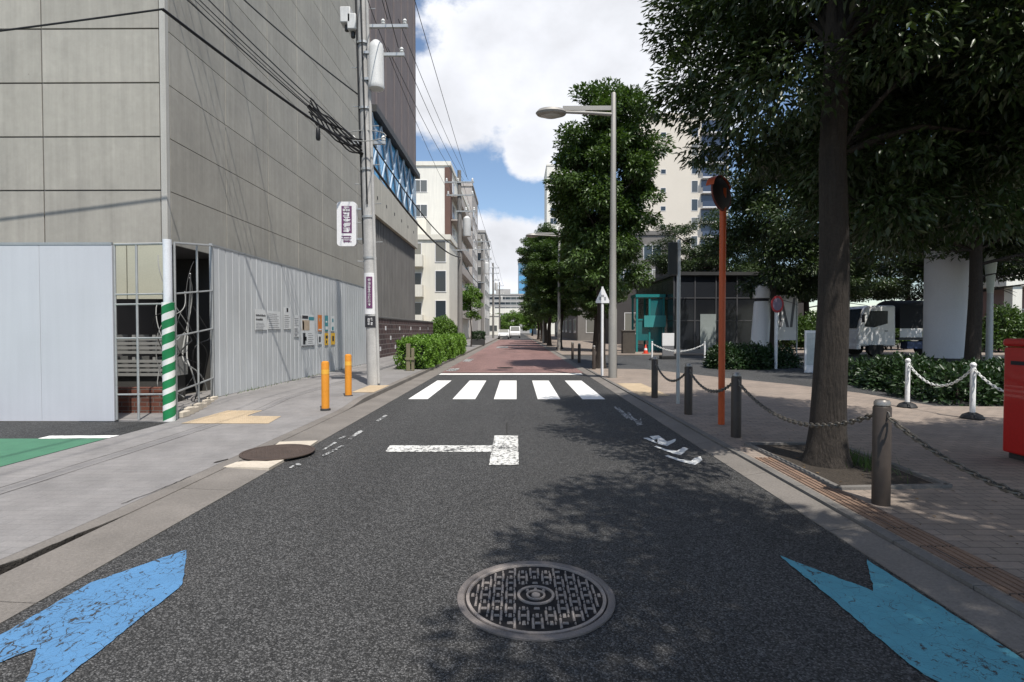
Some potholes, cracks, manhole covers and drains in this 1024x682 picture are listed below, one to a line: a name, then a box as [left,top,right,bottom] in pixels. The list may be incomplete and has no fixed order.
manhole cover [457,561,616,642]
manhole cover [239,444,315,461]
